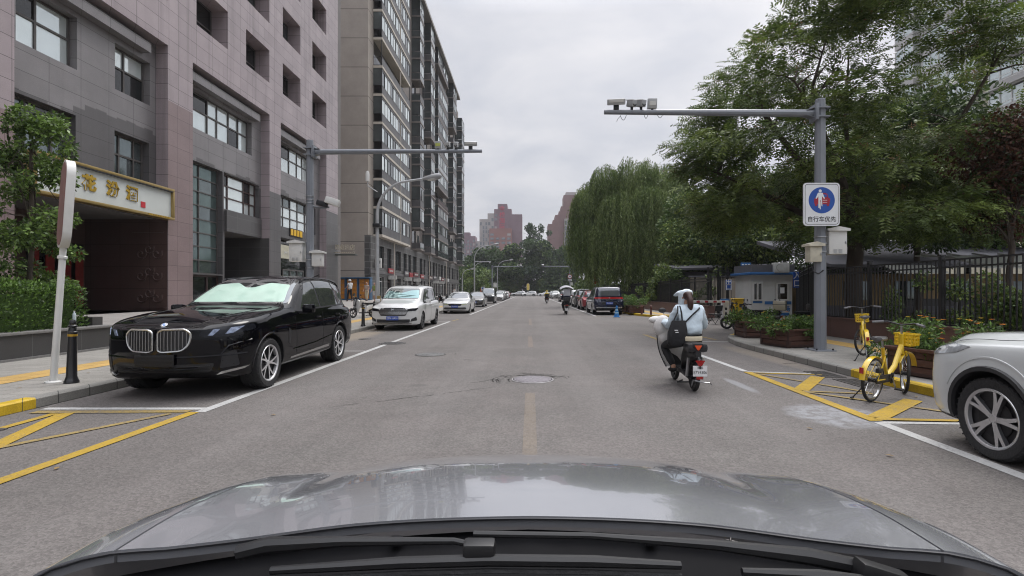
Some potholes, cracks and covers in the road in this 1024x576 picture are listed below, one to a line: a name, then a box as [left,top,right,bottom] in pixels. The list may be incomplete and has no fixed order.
crack [334,373,570,407]
